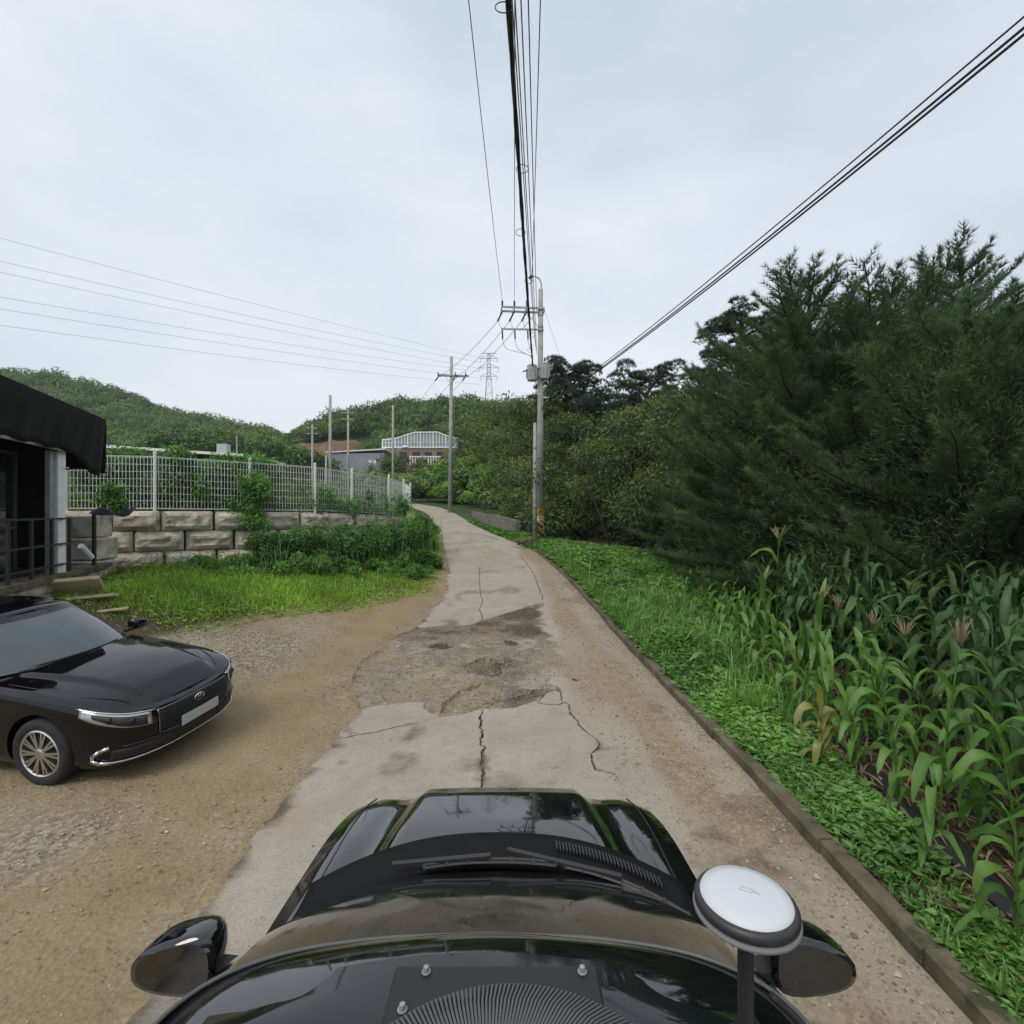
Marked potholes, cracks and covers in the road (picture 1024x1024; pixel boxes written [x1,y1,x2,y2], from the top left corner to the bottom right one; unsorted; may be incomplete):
pothole [440,683,552,714]
crack [346,723,414,738]
crack [478,710,486,787]
crack [538,685,619,780]
pothole [463,657,504,677]
